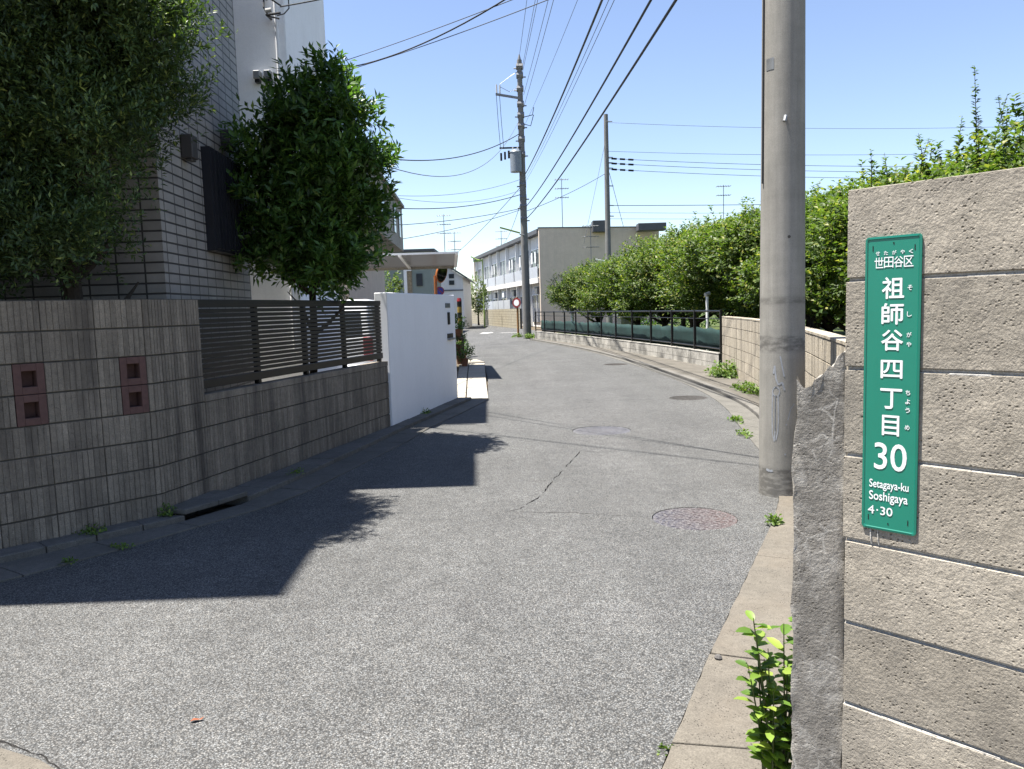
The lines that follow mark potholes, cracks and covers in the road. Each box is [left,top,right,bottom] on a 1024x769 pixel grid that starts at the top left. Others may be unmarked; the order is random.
manhole cover [571,426,632,435]
crack [512,451,633,517]
drain grate [165,504,221,519]
manhole cover [650,507,740,531]
